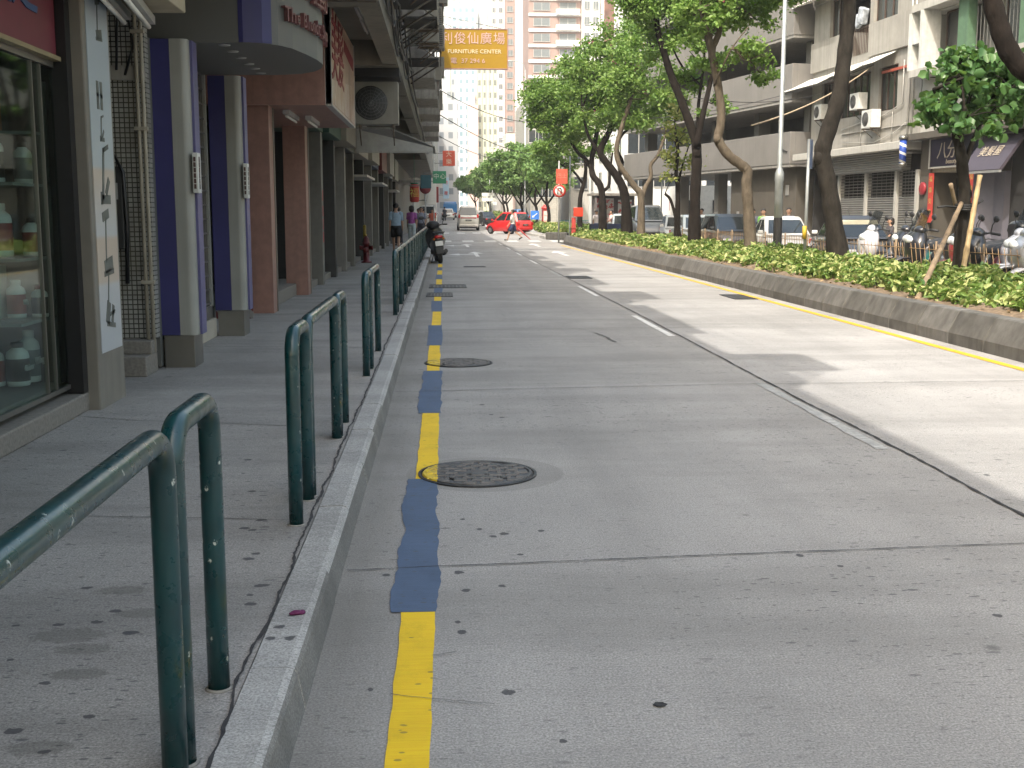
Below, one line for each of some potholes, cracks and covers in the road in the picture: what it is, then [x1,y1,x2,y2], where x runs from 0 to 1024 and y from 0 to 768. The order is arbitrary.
manhole cover [424,358,493,367]
manhole cover [418,460,537,488]
